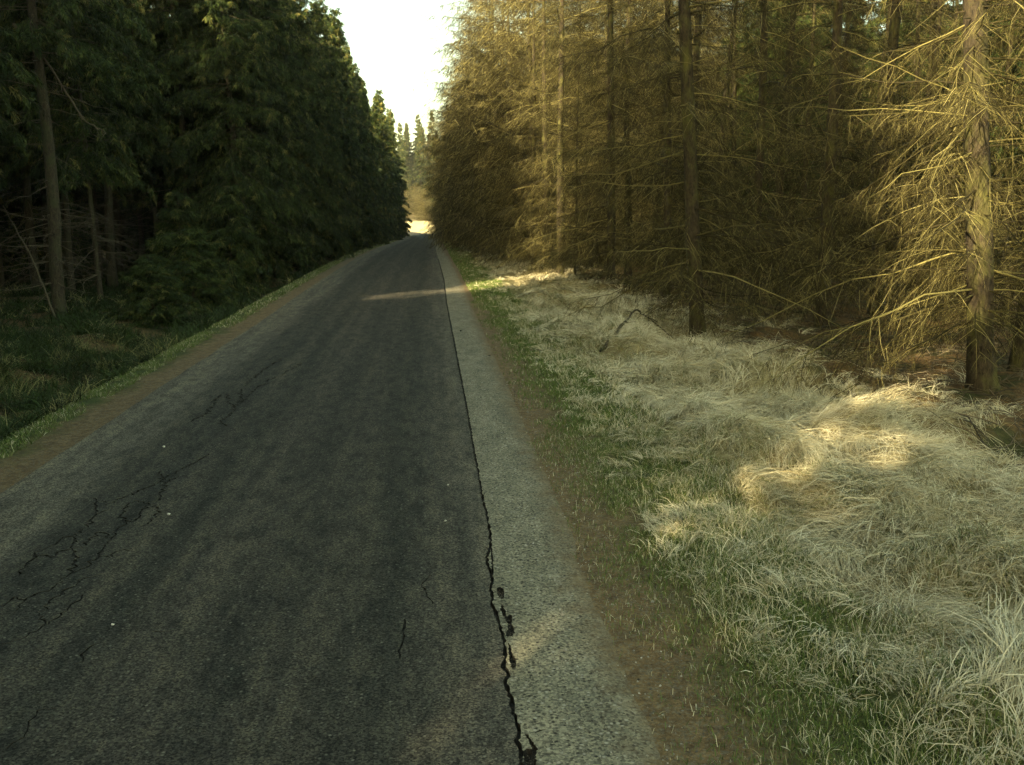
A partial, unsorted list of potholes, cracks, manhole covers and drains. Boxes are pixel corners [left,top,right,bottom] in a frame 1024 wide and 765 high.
crack [438,259,546,765]
crack [398,576,434,660]
crack [191,357,301,426]
crack [4,454,210,644]
crack [5,708,53,751]
